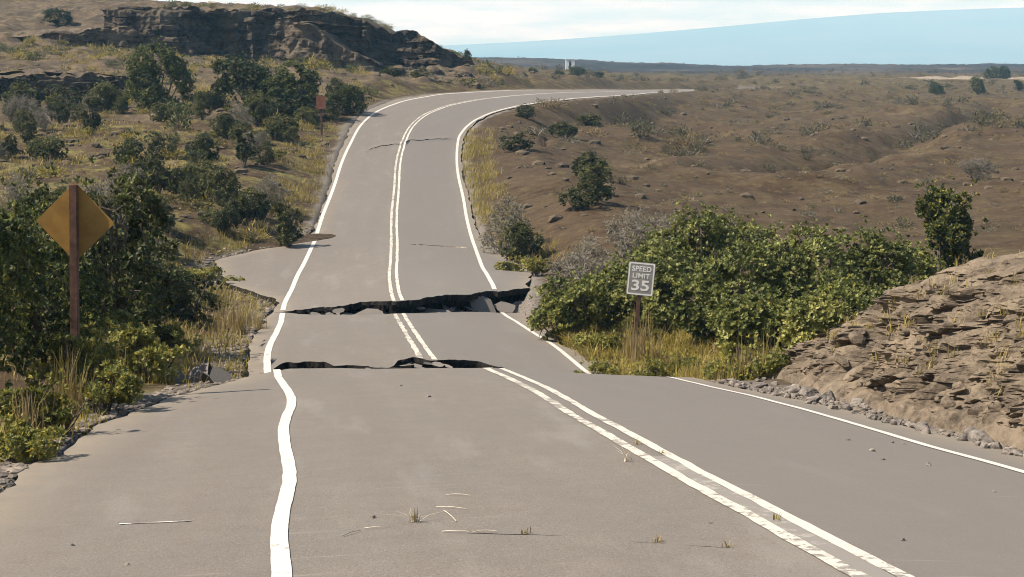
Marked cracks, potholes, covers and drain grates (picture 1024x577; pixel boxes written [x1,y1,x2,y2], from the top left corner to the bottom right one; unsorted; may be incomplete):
crack [162,361,493,383]
